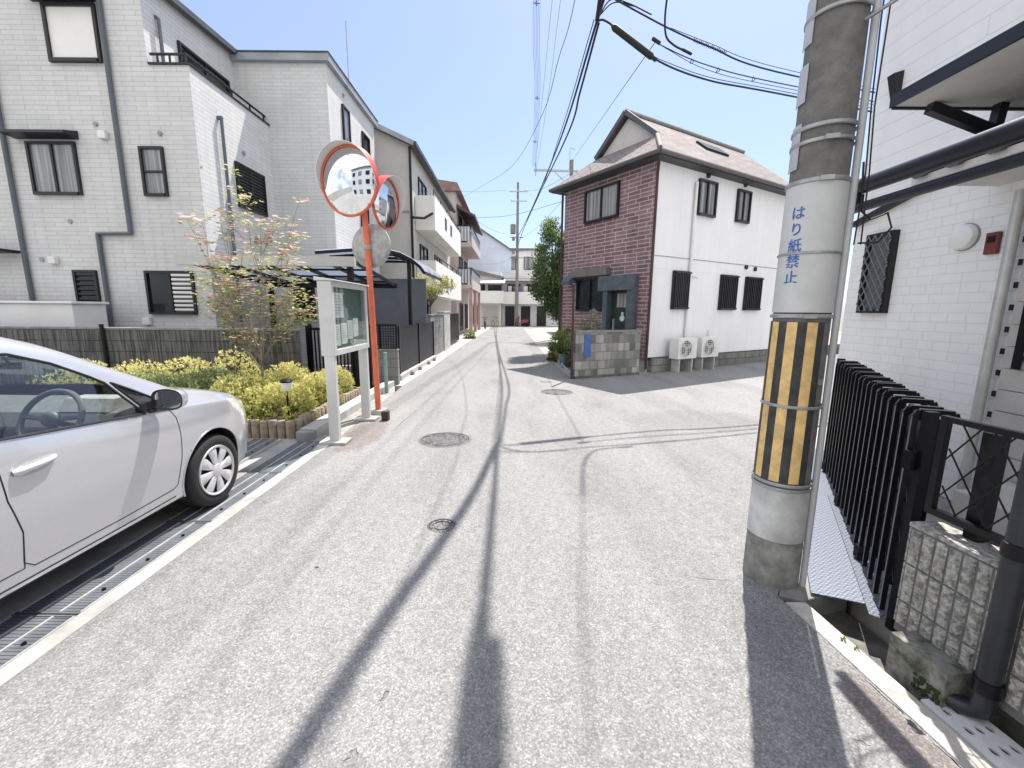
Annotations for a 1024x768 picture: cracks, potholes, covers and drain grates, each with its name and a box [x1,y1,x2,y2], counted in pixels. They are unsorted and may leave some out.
drain grate [15,522,210,615]
drain grate [0,614,77,669]
manhole cover [418,432,472,448]
drain grate [238,439,281,466]
drain grate [166,472,281,522]
drain grate [248,442,320,472]
manhole cover [427,518,457,533]
